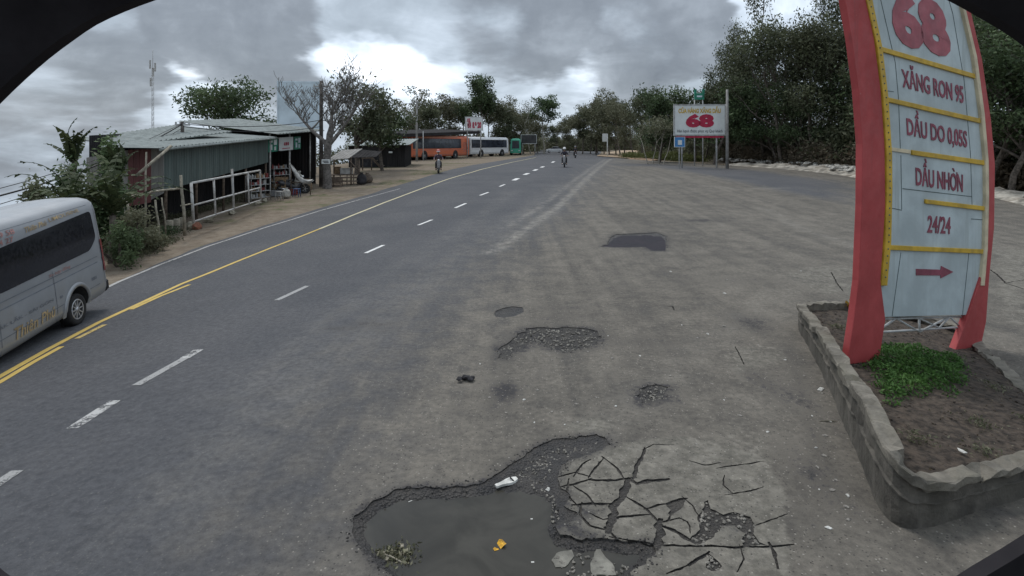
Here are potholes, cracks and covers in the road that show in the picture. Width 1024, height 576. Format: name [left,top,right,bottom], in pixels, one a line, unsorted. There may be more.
pothole [497,326,604,360]
pothole [340,433,666,576]
pothole [634,383,670,405]
crack [558,444,794,574]
